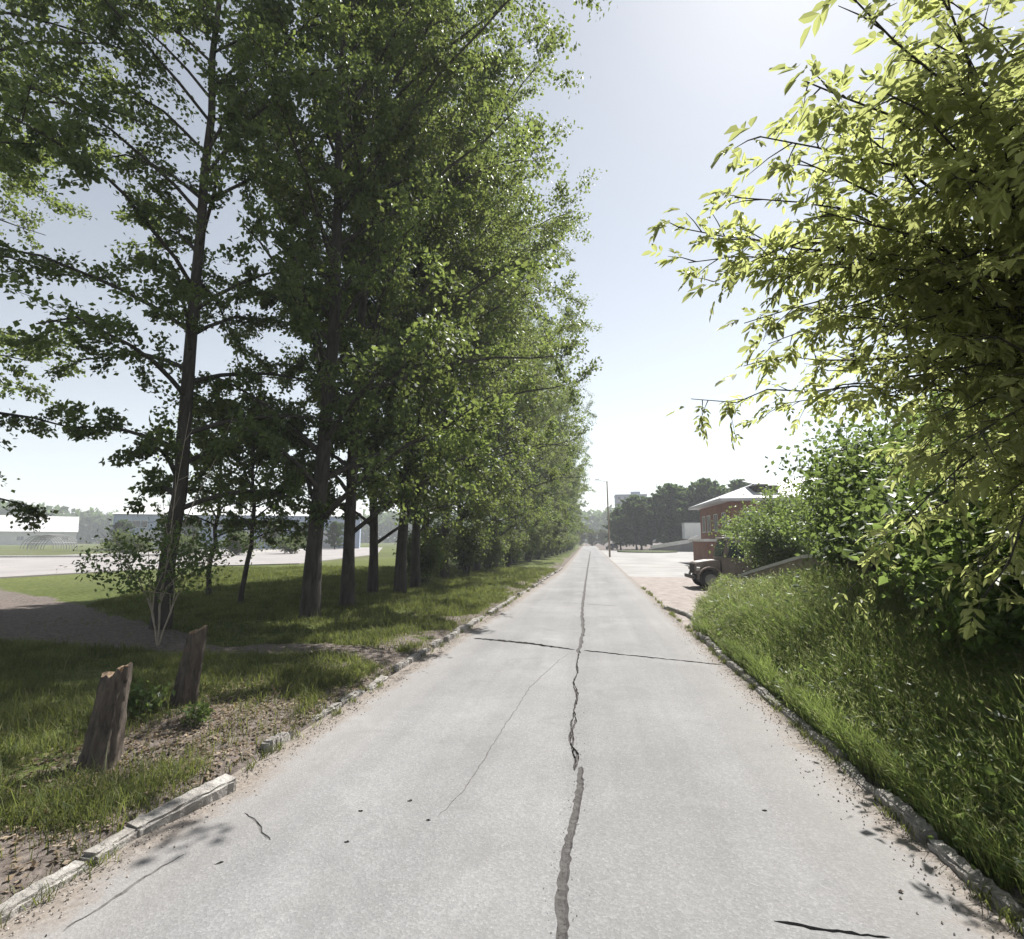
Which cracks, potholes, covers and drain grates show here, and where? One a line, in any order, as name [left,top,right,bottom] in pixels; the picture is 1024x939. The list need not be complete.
crack [774,921,890,938]
crack [439,551,721,815]
crack [245,813,270,840]
crack [63,854,184,932]
